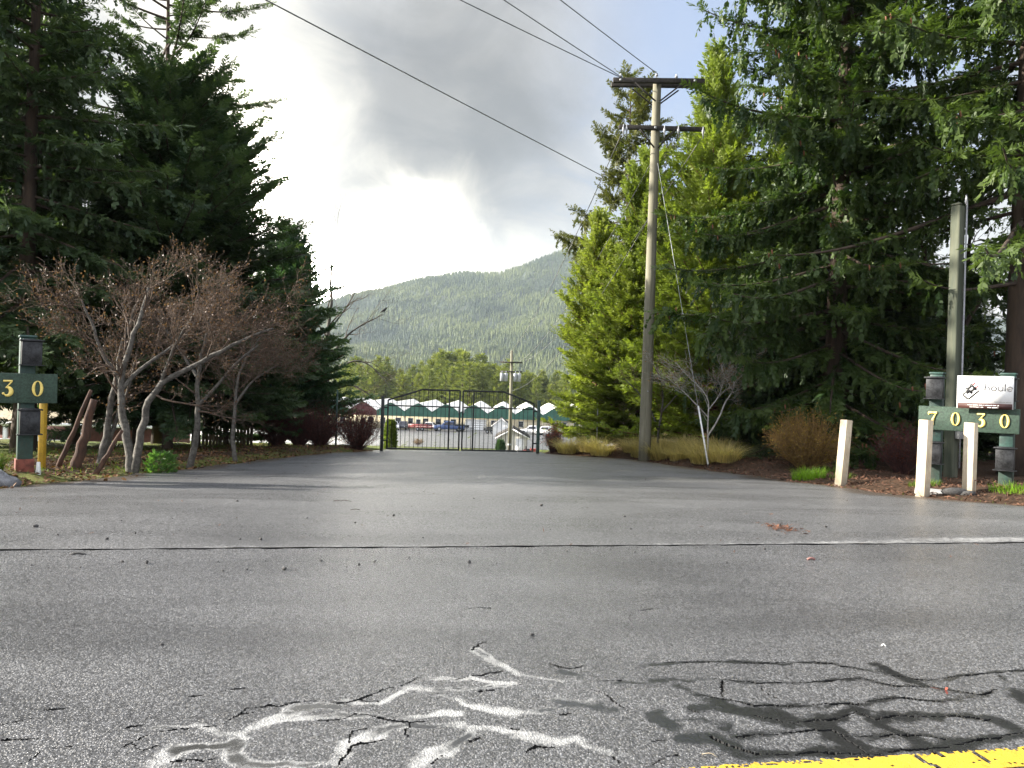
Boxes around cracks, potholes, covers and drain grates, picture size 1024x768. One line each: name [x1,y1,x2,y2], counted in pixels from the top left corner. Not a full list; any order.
crack [121,663,633,765]
crack [652,661,1024,768]
